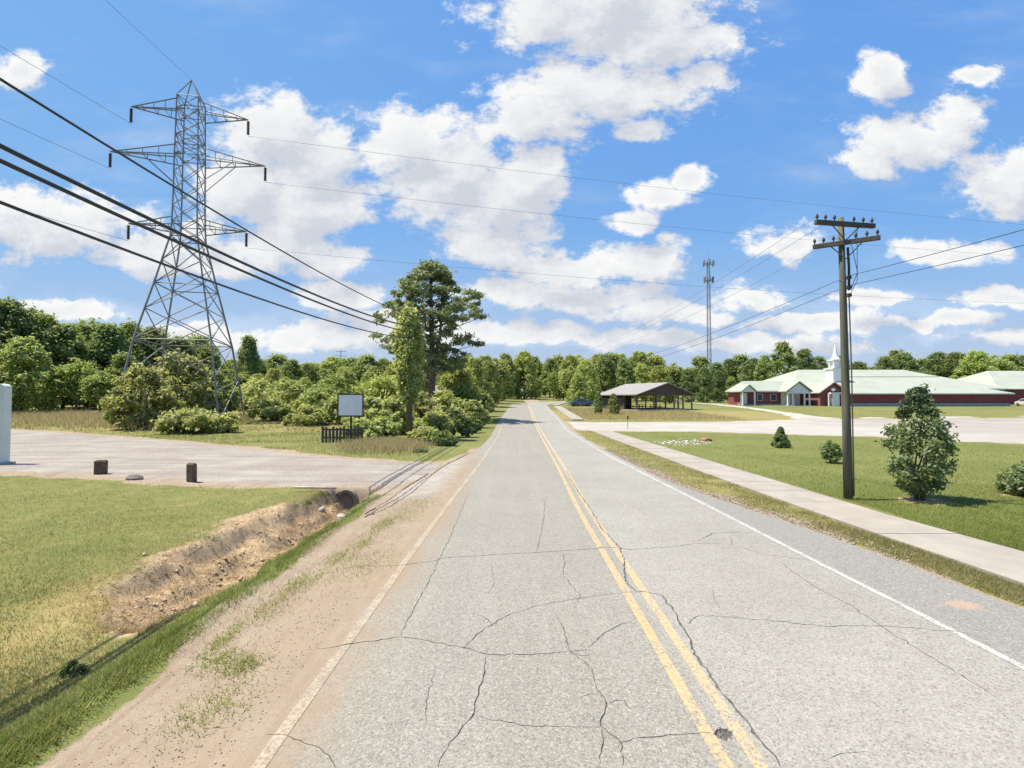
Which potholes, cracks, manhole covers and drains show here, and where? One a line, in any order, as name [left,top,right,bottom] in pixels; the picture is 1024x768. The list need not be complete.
pothole [714,727,733,742]
crack [318,496,989,767]
crack [268,734,335,766]
